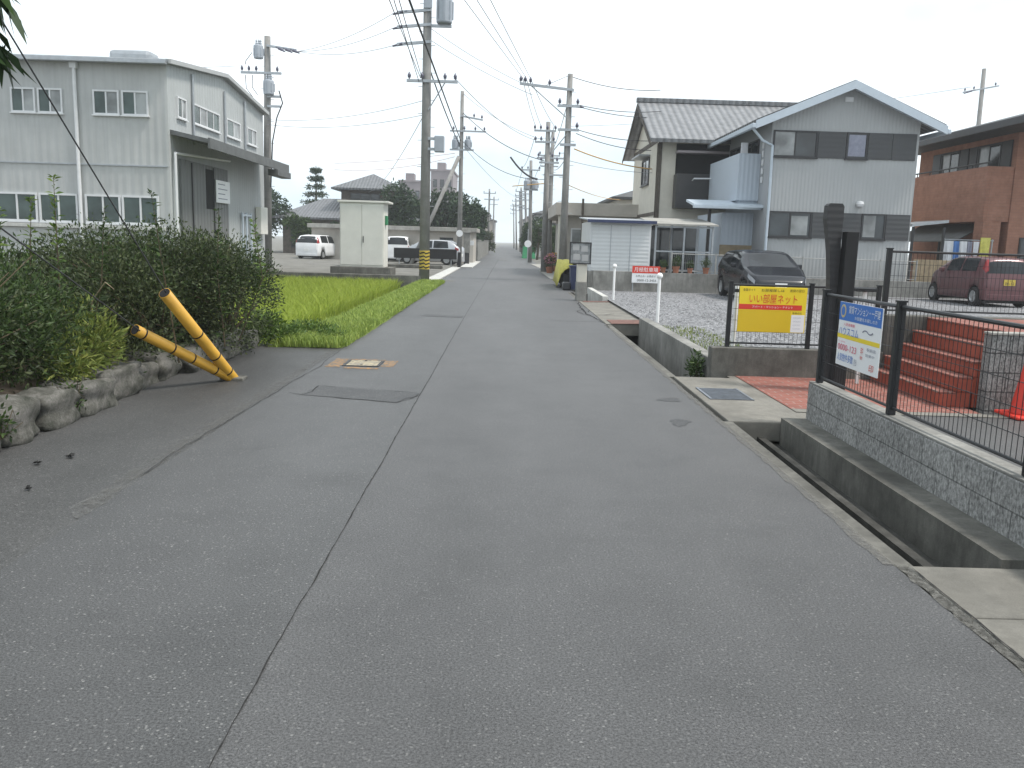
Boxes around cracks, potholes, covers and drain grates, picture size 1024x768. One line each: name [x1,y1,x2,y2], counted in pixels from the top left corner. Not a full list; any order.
drain grate [695,387,754,401]
